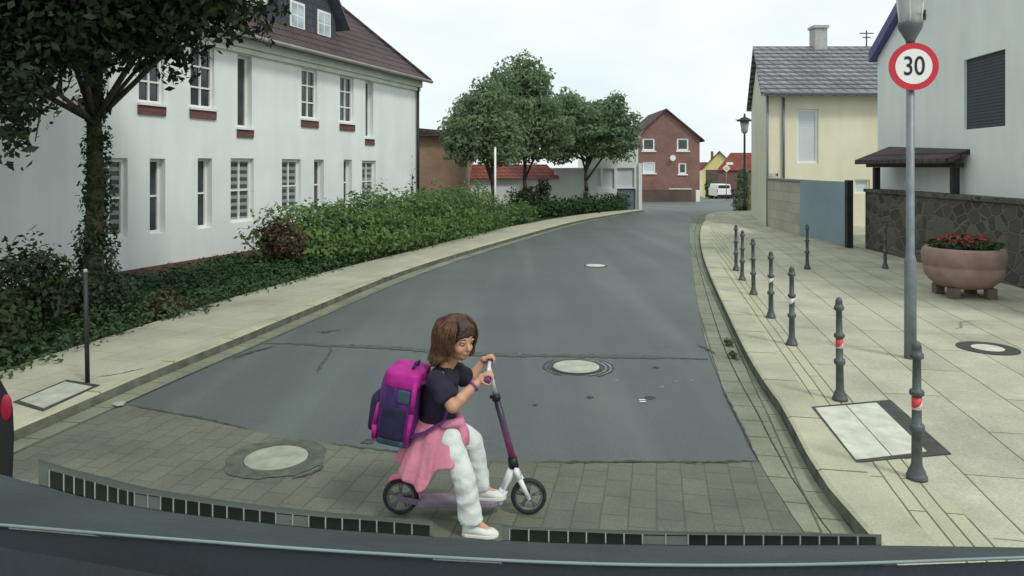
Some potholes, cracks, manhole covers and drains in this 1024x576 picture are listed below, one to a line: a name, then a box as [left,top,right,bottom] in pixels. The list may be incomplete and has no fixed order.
crack [316,330,340,372]
manhole cover [956,341,1021,356]
utility cover [13,380,100,411]
manhole cover [225,439,326,479]
manhole cover [551,359,602,375]
utility cover [812,400,951,463]
